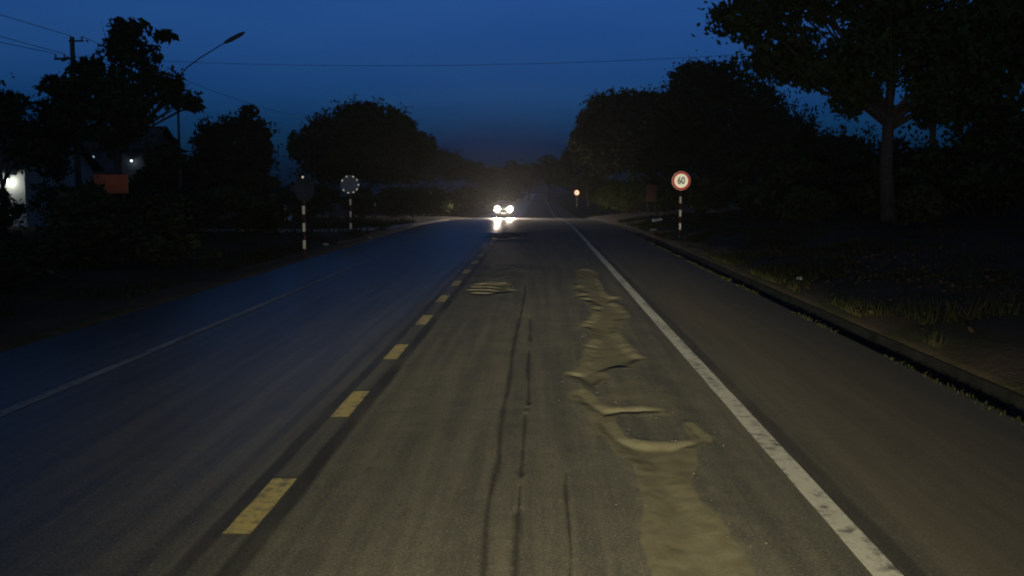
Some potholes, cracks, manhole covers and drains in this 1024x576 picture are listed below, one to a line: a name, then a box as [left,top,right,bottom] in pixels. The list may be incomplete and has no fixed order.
crack [558,446,578,576]
crack [472,281,535,576]
